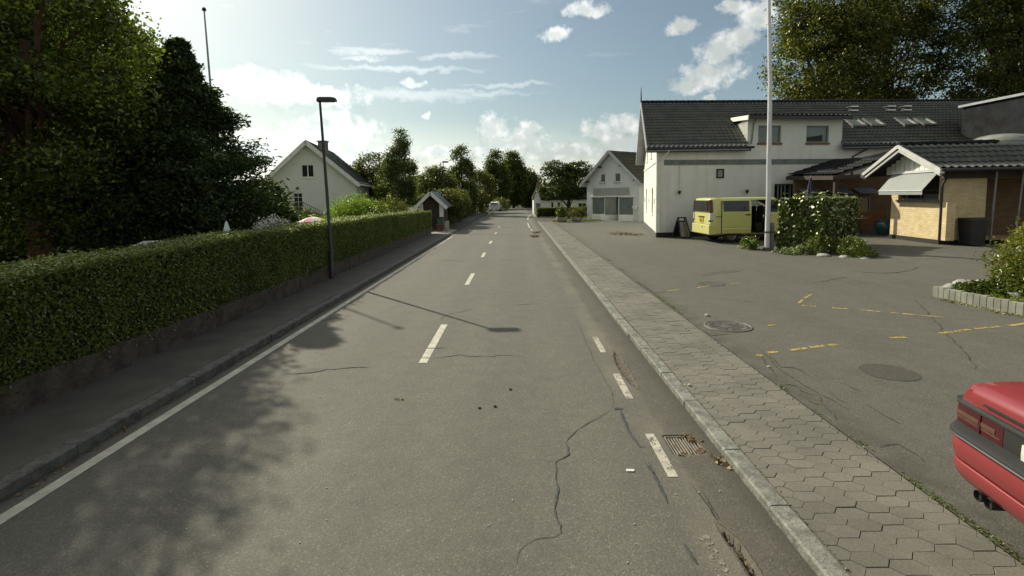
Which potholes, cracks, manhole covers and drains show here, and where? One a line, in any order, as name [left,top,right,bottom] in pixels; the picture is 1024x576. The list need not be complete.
manhole cover [704,320,753,332]
drain grate [663,436,706,455]
crack [516,325,613,563]
crack [914,300,975,369]
crack [760,349,857,421]
